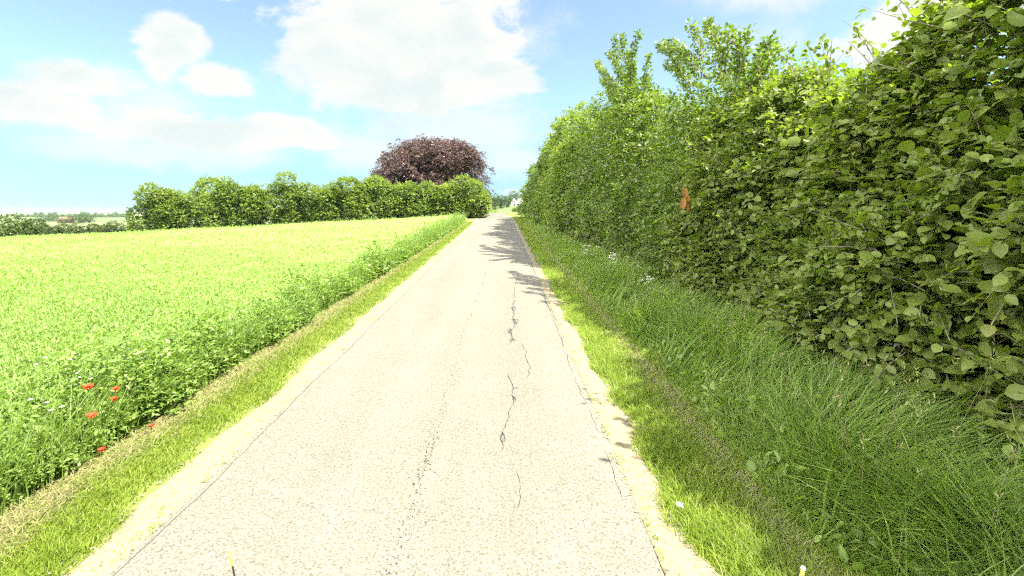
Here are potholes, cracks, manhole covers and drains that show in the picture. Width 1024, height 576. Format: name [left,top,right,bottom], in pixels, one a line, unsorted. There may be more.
crack [500,259,624,501]
crack [113,223,476,576]
